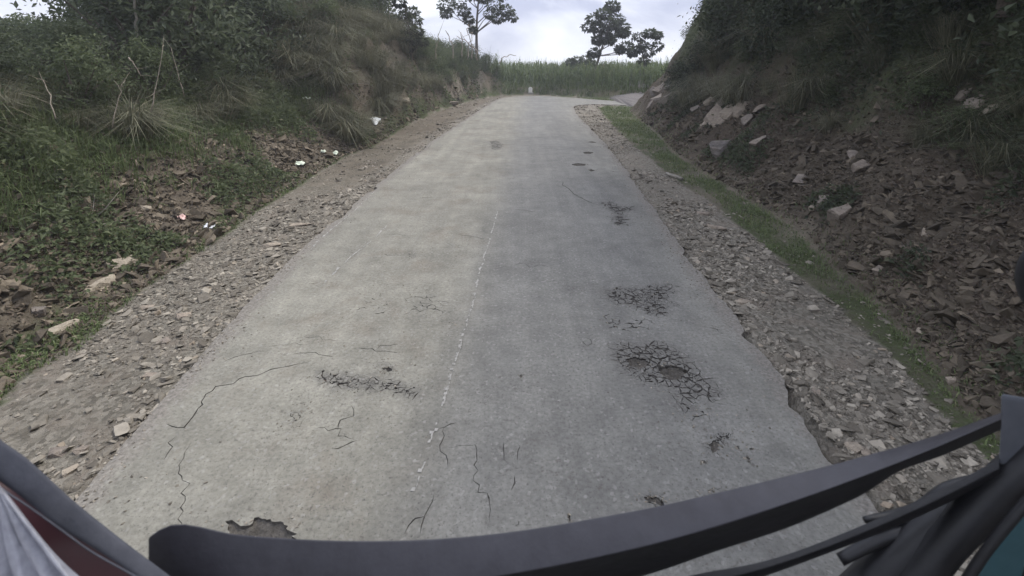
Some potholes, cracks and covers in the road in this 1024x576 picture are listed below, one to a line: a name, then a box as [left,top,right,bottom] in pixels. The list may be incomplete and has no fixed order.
pothole [626,358,649,369]
crack [562,184,635,227]
pothole [658,365,686,382]
crack [165,337,420,524]
crack [354,296,451,322]
crack [583,283,727,421]
pothole [225,517,296,539]
crack [452,445,491,523]
